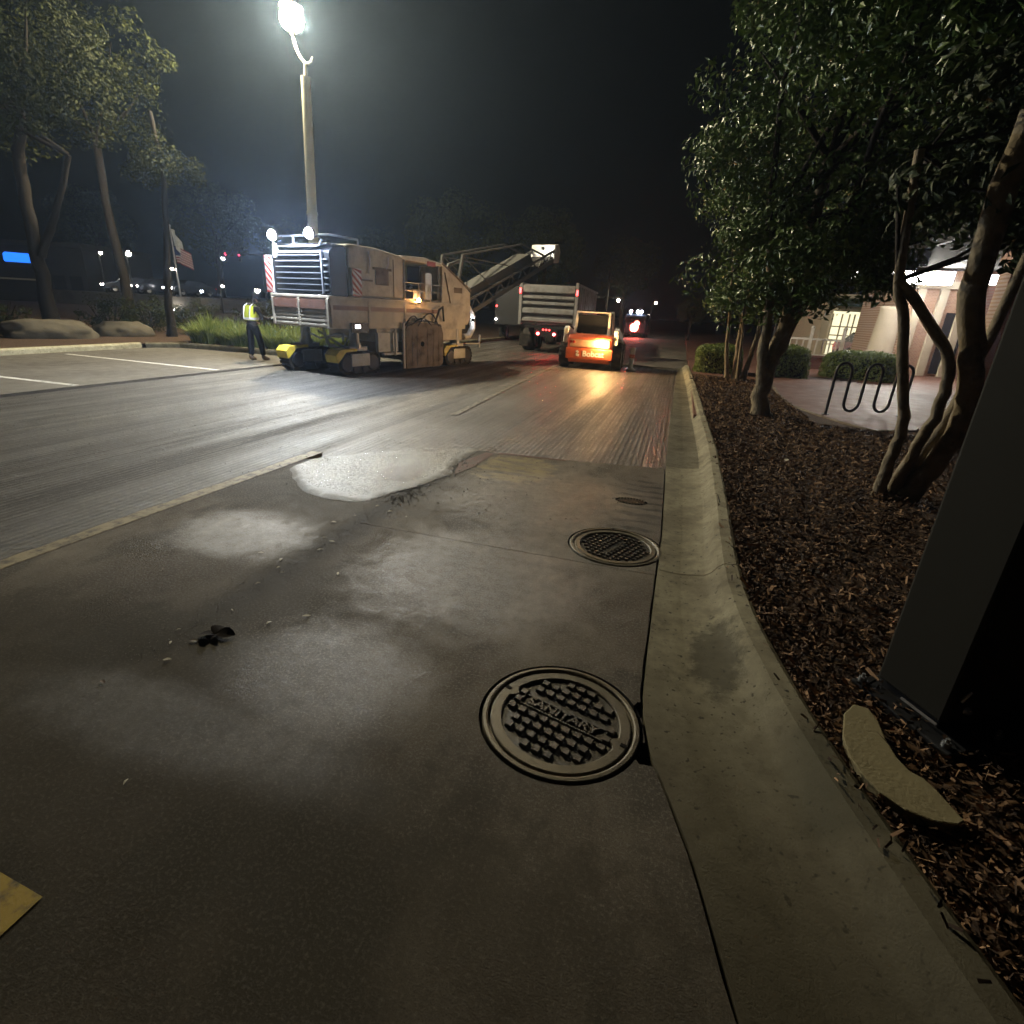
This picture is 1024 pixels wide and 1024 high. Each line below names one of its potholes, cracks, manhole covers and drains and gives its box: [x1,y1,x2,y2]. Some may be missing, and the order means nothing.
manhole cover [569,528,661,567]
manhole cover [482,668,640,786]
